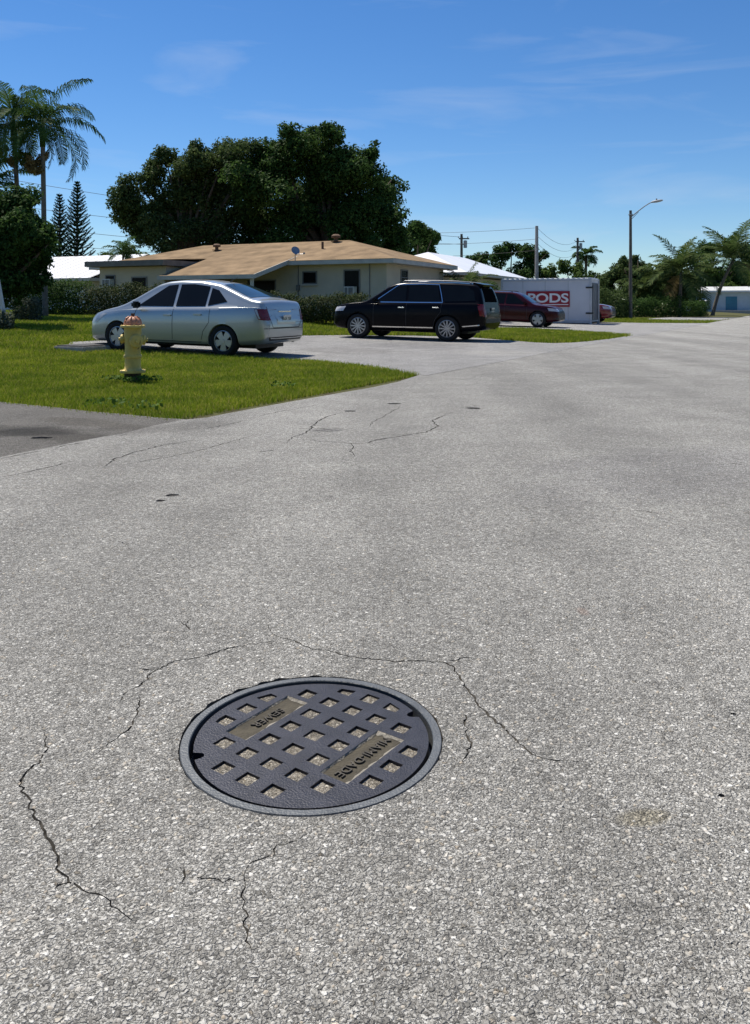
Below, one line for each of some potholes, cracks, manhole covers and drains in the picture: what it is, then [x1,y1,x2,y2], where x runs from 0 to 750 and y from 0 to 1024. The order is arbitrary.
crack [18,732,132,920]
crack [96,640,275,754]
manhole cover [178,675,443,817]
crack [182,833,310,951]
crack [268,626,595,767]
crack [107,406,452,468]
